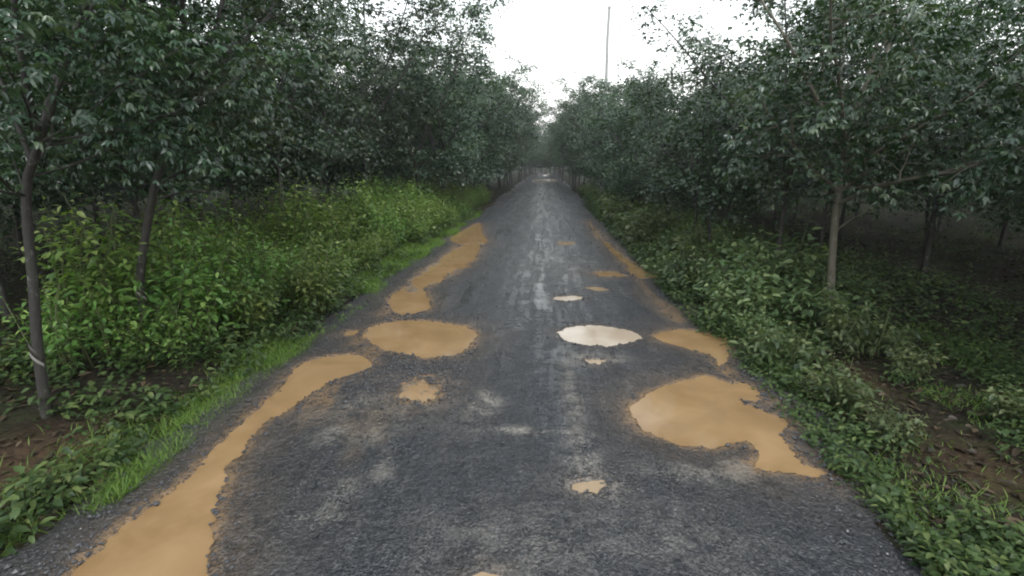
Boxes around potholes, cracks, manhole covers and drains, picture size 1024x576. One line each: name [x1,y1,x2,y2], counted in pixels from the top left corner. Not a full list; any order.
pothole [362,320,477,358]
pothole [654,330,732,366]
pothole [387,285,431,315]
pothole [630,375,828,477]
pothole [450,223,487,246]
pothole [556,325,642,347]
